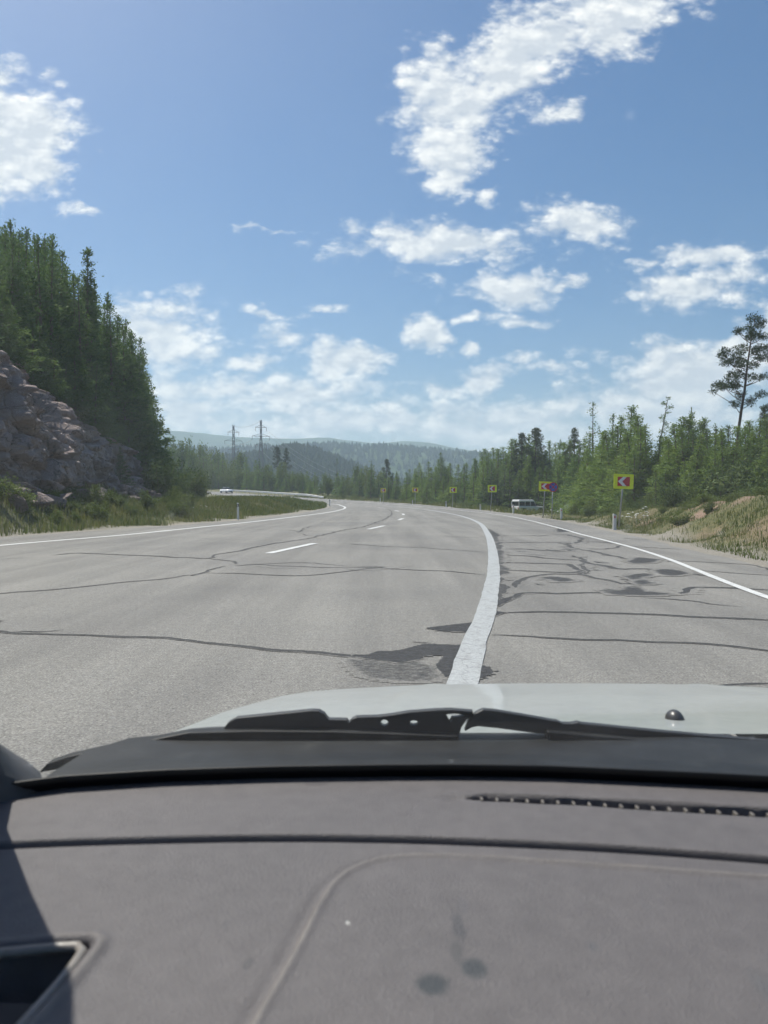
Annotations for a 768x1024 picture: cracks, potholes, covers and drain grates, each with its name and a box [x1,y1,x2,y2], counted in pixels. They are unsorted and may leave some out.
crack [0,508,475,594]
crack [0,620,461,683]
crack [343,528,768,651]
